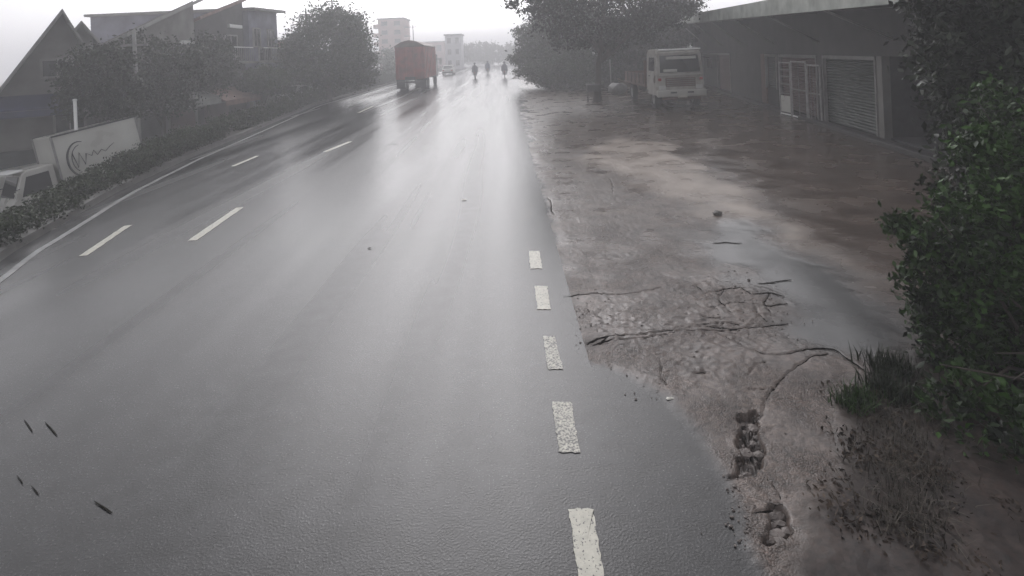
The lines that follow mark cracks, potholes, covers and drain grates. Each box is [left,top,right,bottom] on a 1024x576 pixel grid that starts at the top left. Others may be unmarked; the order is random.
pothole [761,501,794,546]
crack [587,279,868,423]
pothole [726,410,767,481]
